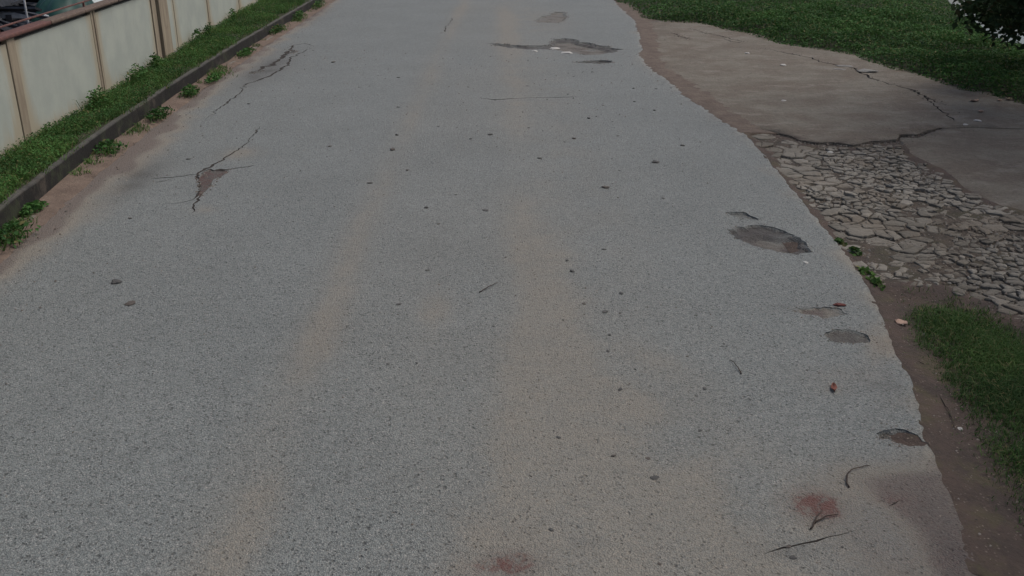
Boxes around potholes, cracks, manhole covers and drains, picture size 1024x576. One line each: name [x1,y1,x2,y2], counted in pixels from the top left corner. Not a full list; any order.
crack [207,43,310,118]
pothole [490,38,623,55]
pothole [728,225,811,255]
pothole [876,428,927,447]
crack [160,126,260,212]
pothole [824,329,870,344]
